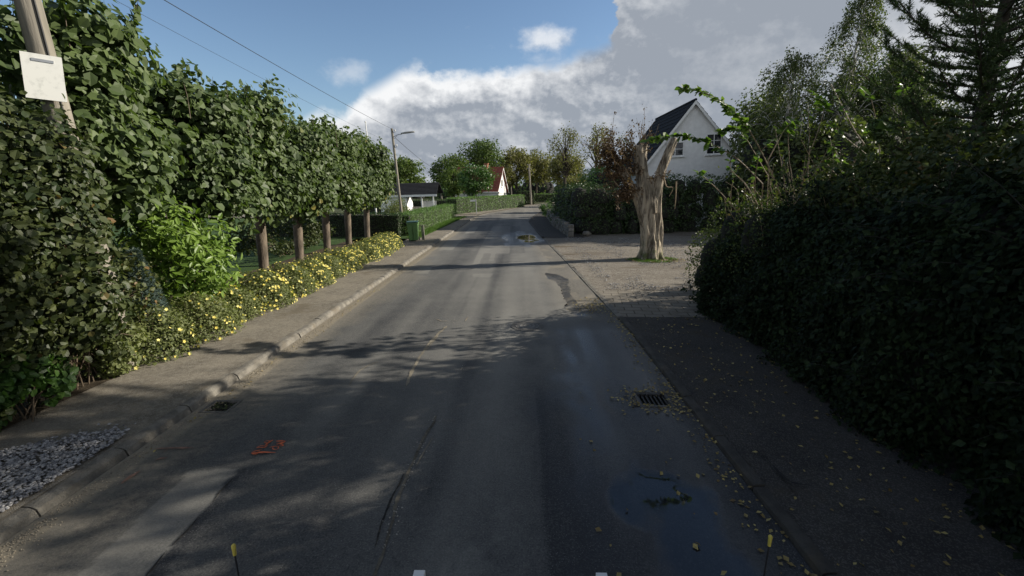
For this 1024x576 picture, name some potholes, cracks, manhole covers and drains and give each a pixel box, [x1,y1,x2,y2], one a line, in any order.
crack [372,415,437,576]
drain grate [632,391,675,408]
drain grate [198,400,243,413]
